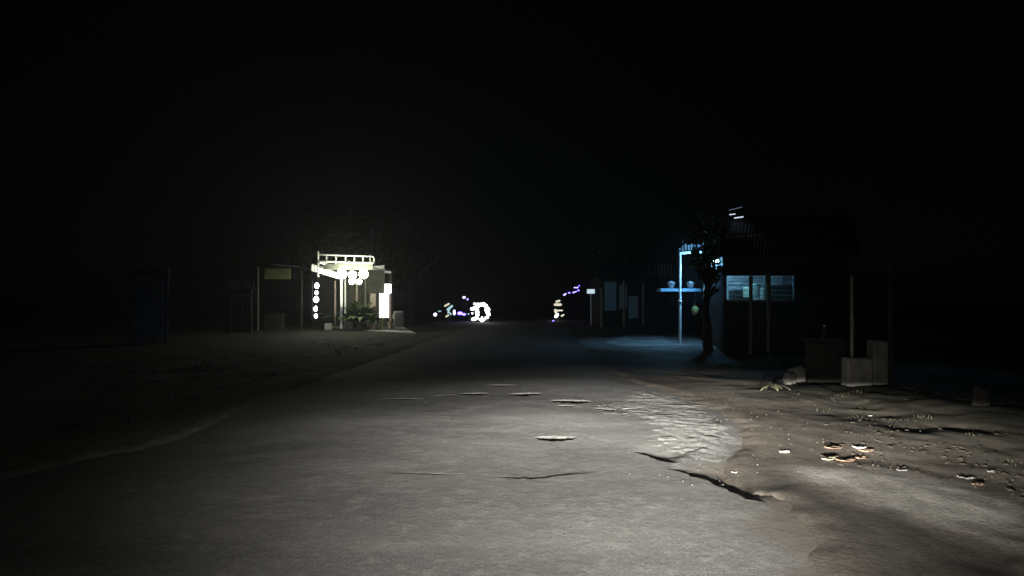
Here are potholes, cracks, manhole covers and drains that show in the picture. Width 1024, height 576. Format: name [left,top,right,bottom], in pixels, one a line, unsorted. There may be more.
crack [478,391,766,502]
